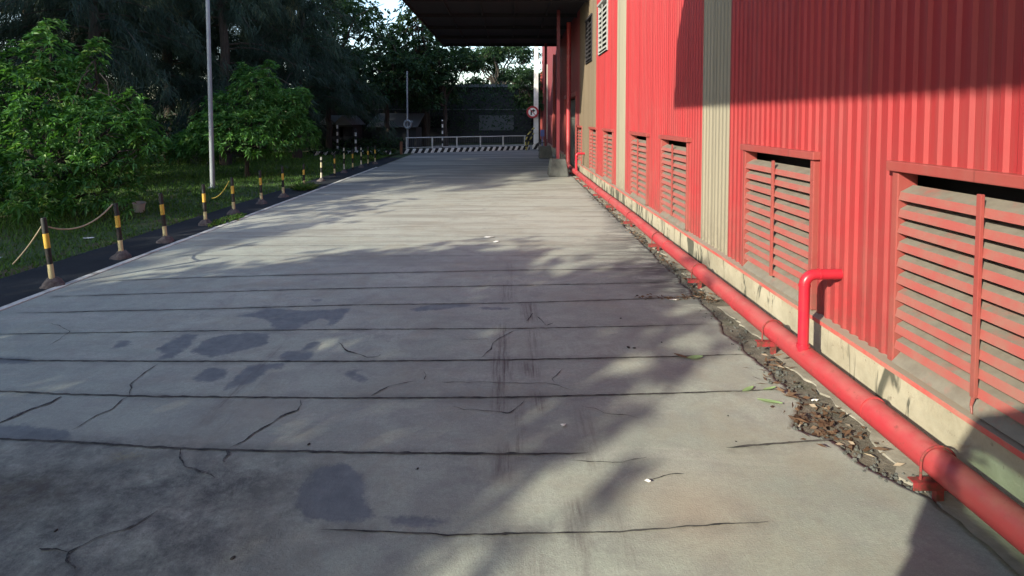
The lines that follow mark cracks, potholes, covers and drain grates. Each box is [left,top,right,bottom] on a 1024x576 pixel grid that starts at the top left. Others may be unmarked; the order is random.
crack [179,400,302,477]
crack [39,512,155,569]
crack [0,366,154,430]
